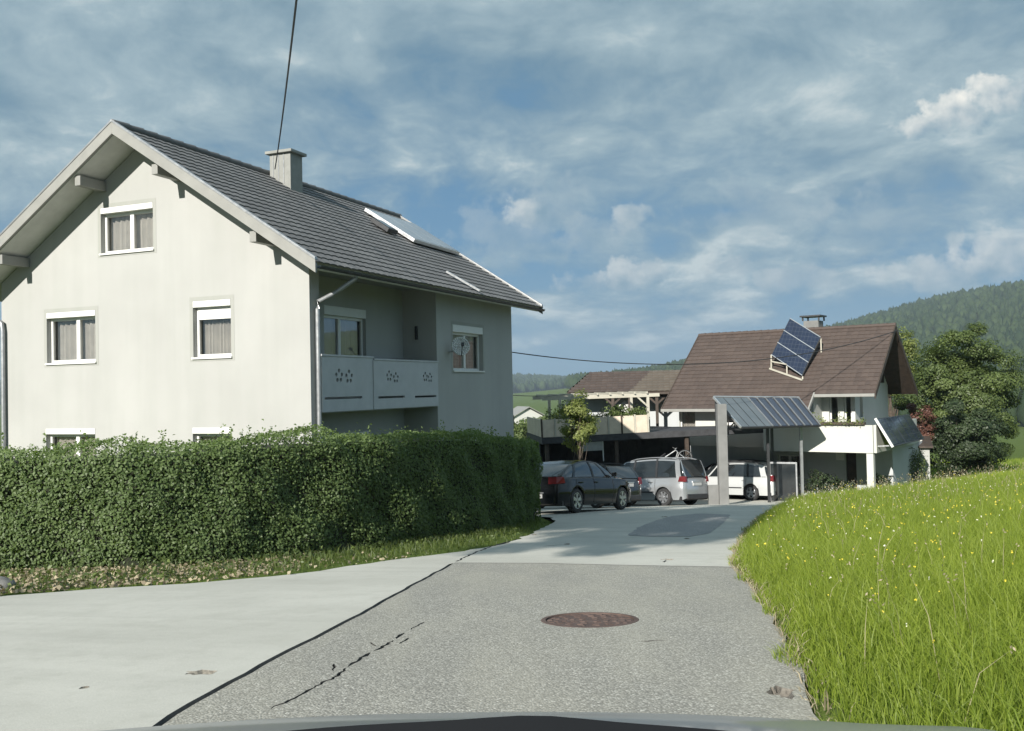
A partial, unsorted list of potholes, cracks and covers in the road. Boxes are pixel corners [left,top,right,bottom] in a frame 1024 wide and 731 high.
manhole cover [541,612,639,628]
crack [271,622,424,709]
